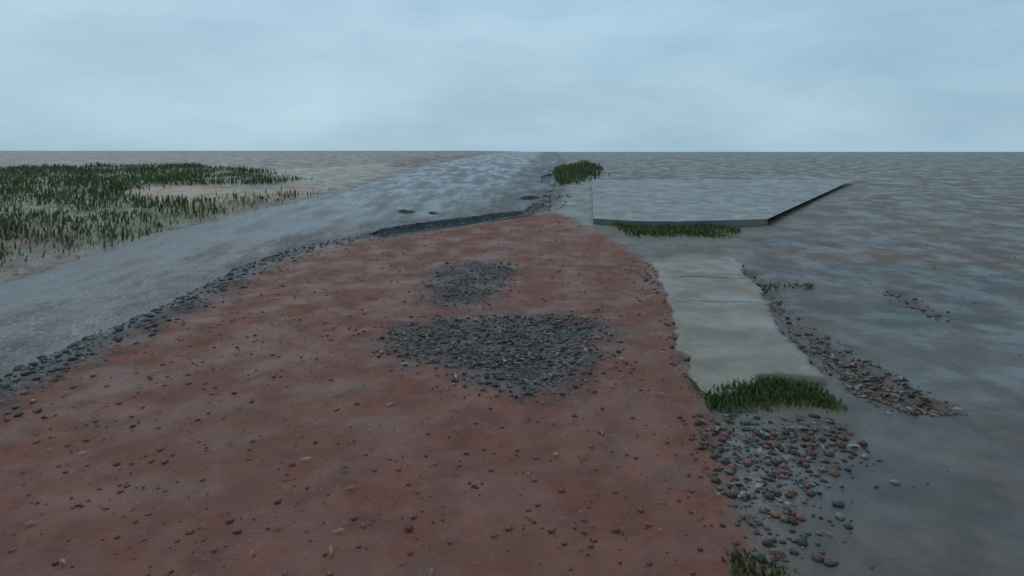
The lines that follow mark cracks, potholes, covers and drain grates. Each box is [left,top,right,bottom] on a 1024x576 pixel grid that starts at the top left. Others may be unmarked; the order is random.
pothole [372,212,533,239]
